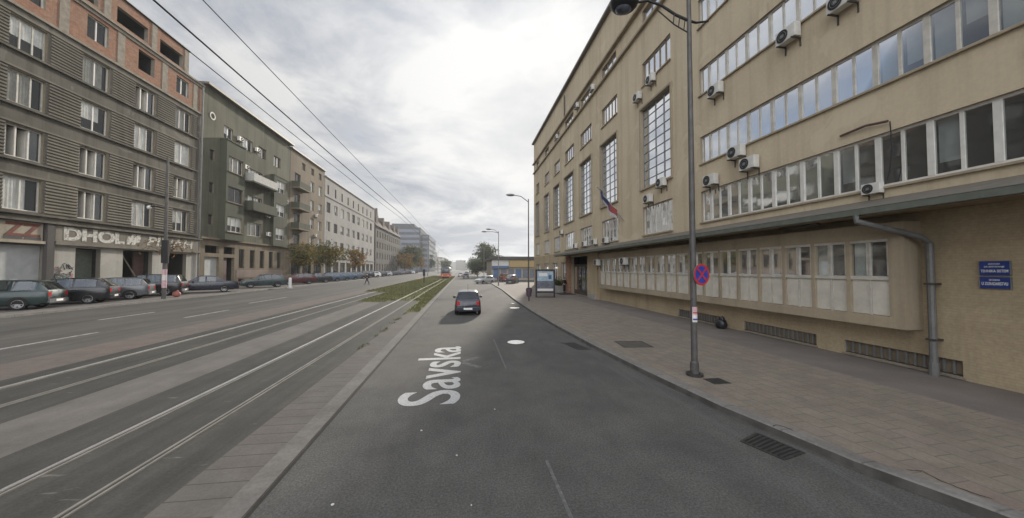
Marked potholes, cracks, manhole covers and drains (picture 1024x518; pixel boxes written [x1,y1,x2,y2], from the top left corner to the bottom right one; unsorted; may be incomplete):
drain grate [740,432,805,460]
drain grate [563,342,589,350]
